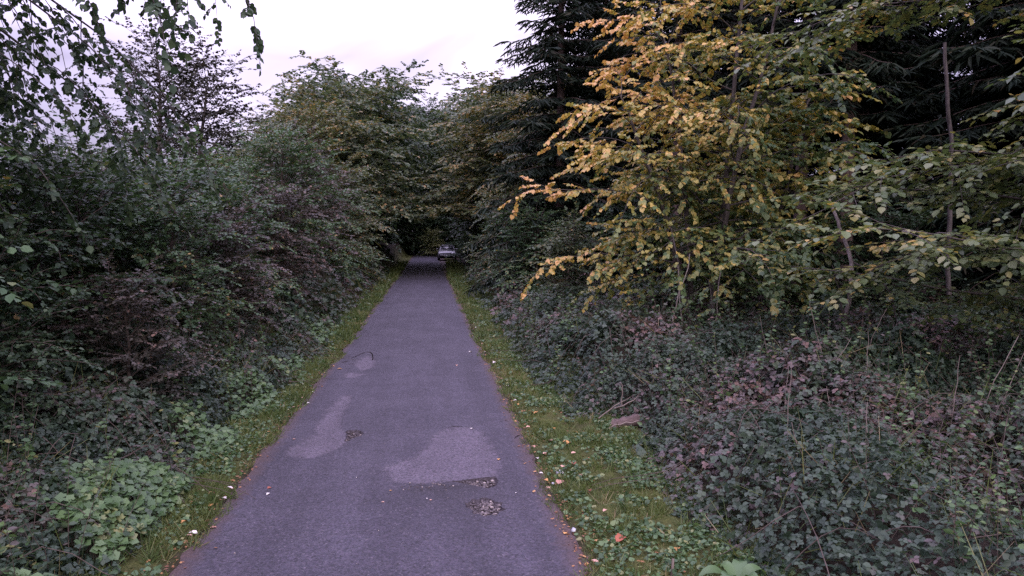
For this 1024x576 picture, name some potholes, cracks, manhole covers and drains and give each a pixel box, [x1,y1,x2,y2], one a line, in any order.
pothole [451,476,498,488]
pothole [465,498,506,517]
pothole [345,430,363,441]
